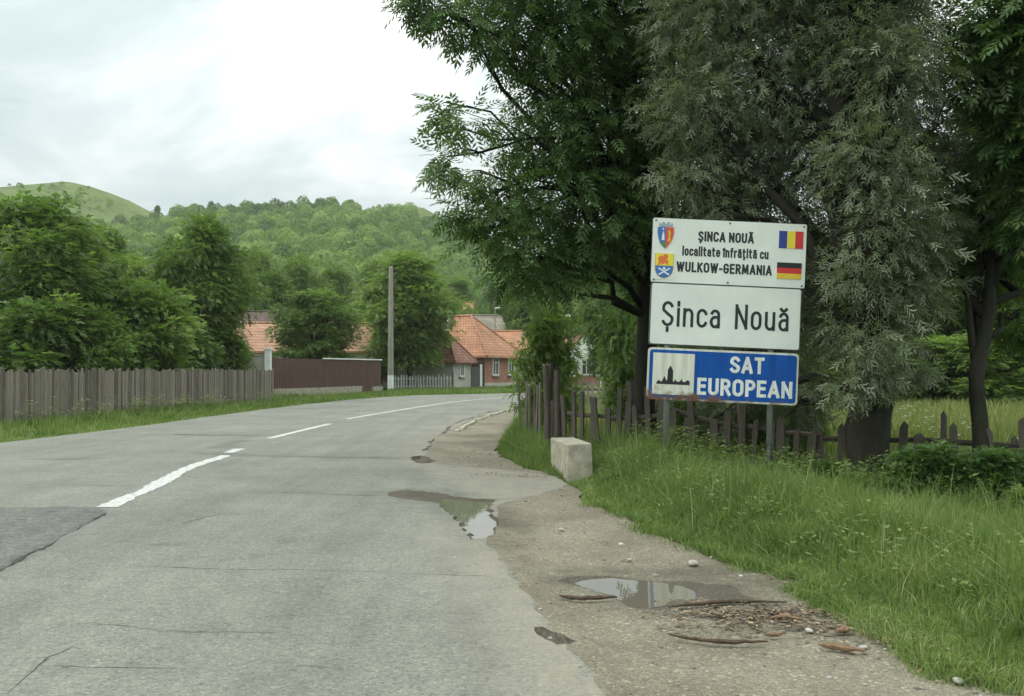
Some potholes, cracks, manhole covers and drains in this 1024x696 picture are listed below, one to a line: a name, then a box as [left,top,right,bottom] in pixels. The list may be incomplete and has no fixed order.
crack [82,623,270,633]
crack [6,646,337,696]
pothole [534,626,575,644]
crack [422,410,498,451]
pothole [388,489,499,539]
pothole [557,576,754,611]
